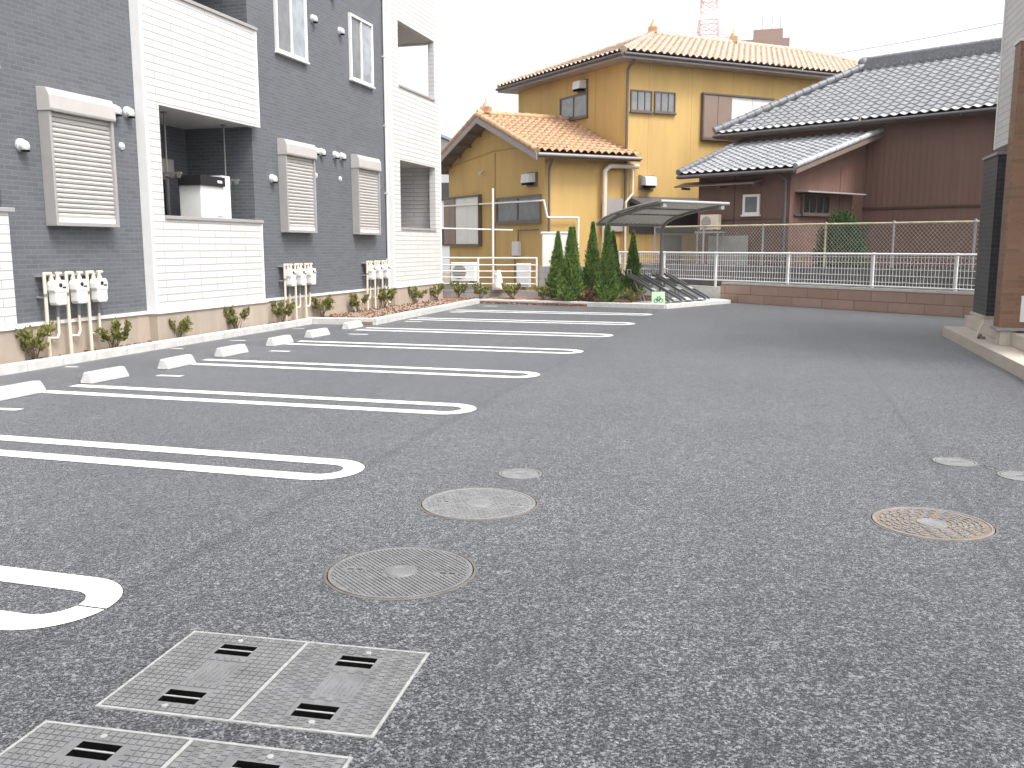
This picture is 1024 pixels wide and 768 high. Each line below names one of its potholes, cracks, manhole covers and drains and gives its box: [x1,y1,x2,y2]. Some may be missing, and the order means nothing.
manhole cover [0,720,353,768]
manhole cover [868,506,999,542]
manhole cover [324,546,477,601]
manhole cover [95,631,430,739]
manhole cover [419,487,539,521]
